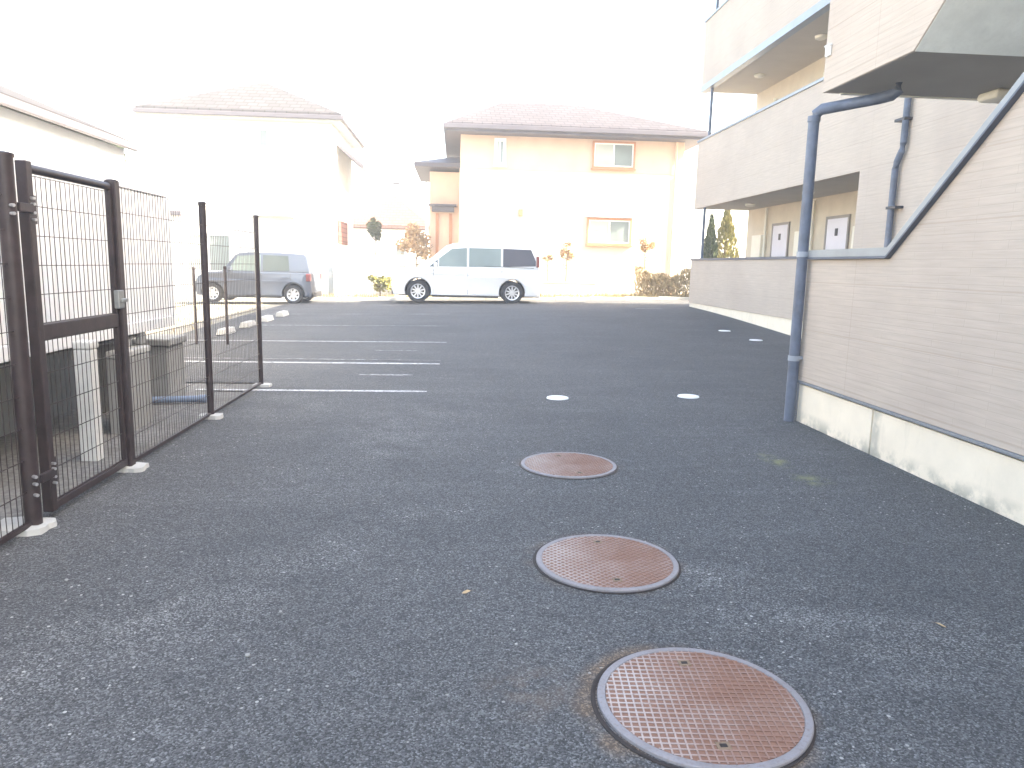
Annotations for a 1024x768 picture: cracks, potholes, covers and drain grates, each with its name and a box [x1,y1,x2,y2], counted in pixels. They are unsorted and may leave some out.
manhole cover [519,452,619,479]
manhole cover [590,647,816,768]
manhole cover [533,534,681,594]
